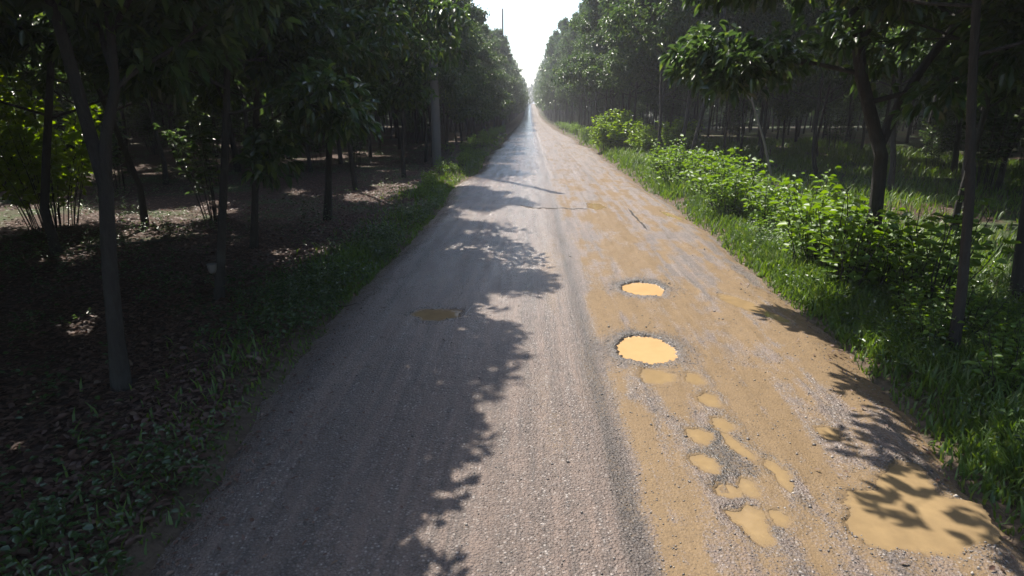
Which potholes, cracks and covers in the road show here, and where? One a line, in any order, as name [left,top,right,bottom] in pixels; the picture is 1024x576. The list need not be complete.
pothole [584,202,611,211]
pothole [824,452,1020,566]
pothole [714,427,766,466]
pothole [685,387,732,412]
pothole [679,367,716,389]
pothole [606,331,689,367]
pothole [403,307,469,324]
pothole [698,410,748,436]
pothole [759,500,808,538]
crack [628,208,647,230]
pothole [673,421,720,451]
